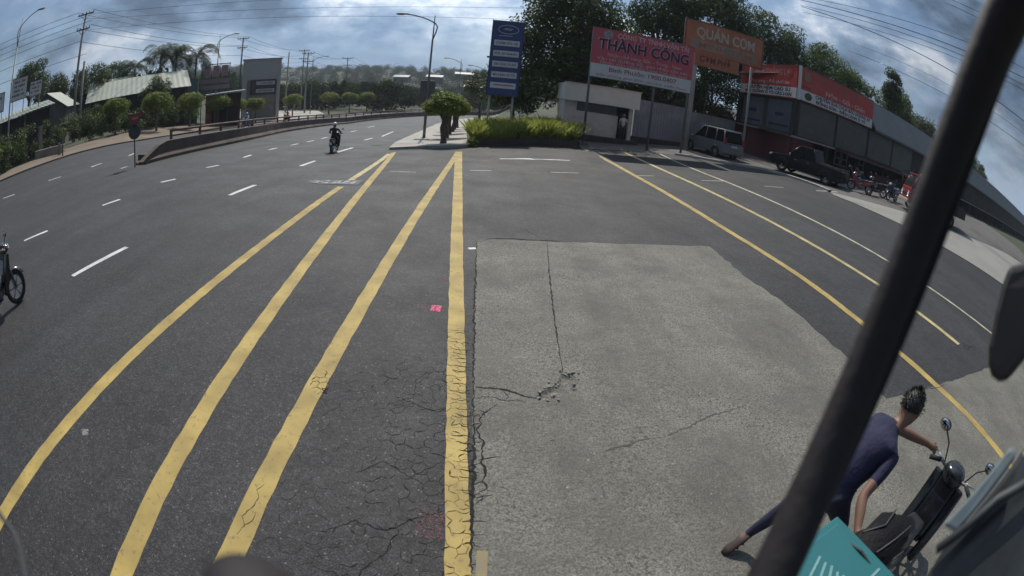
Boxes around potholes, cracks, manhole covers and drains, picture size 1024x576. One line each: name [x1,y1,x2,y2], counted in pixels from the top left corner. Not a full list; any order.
crack [261,229,570,576]
pothole [536,370,580,402]
